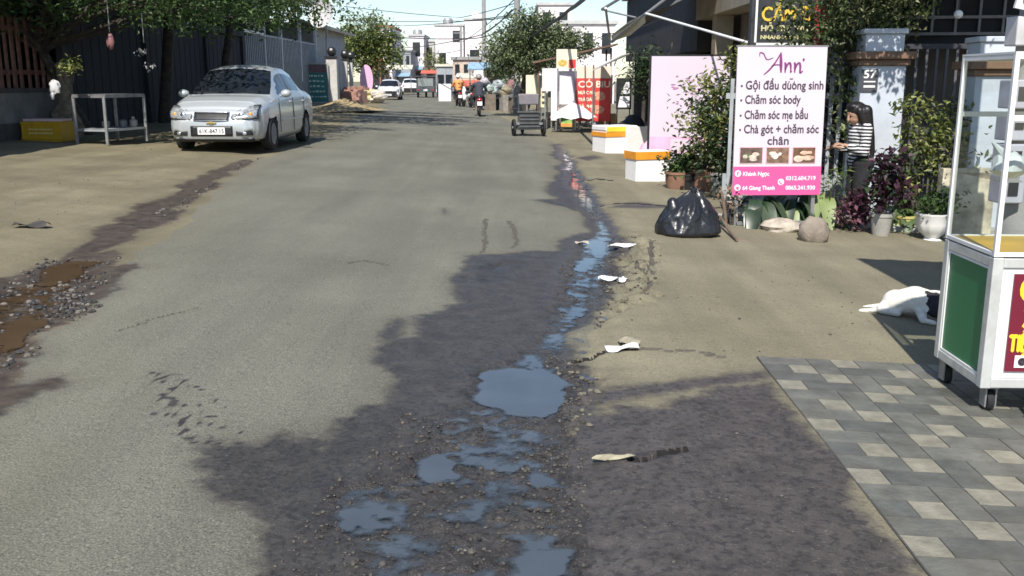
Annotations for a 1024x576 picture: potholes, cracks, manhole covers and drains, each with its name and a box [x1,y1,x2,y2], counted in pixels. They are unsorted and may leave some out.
crack [118,307,199,331]
pothole [460,367,582,419]
pothole [24,263,90,288]
crack [630,446,689,462]
crack [571,347,726,364]
crack [506,221,519,249]
crack [479,219,489,254]
